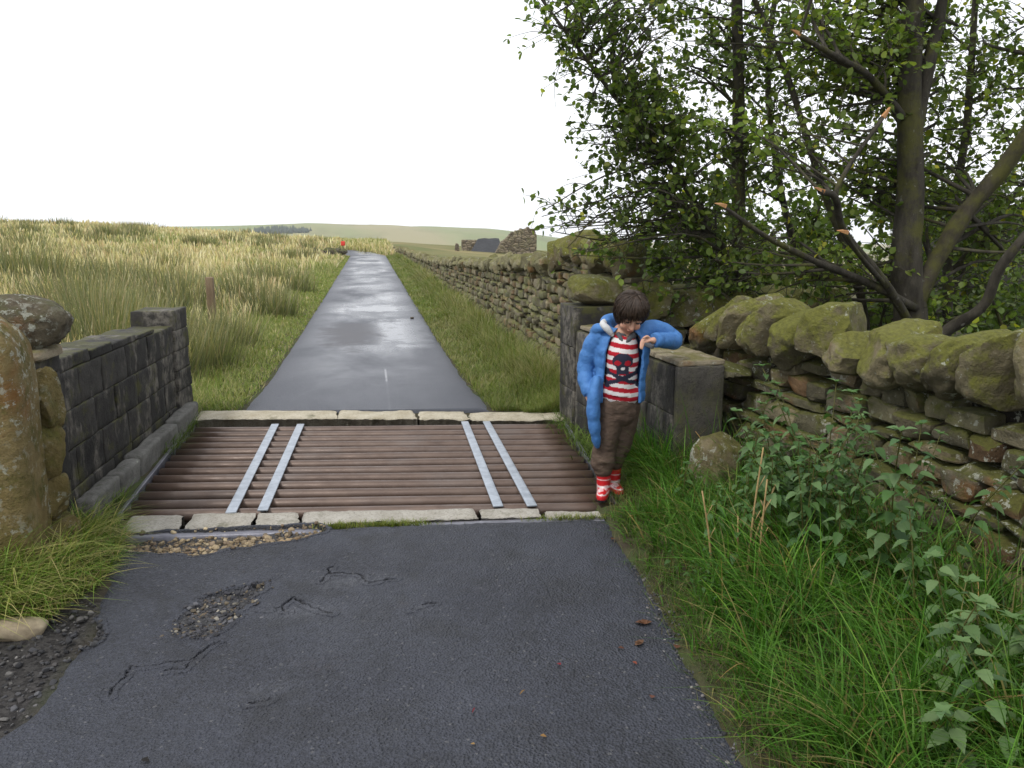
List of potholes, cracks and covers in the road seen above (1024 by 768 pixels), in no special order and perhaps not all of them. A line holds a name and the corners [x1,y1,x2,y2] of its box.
pothole [114,521,333,558]
crack [253,564,443,617]
crack [100,638,280,709]
pothole [96,571,309,662]
